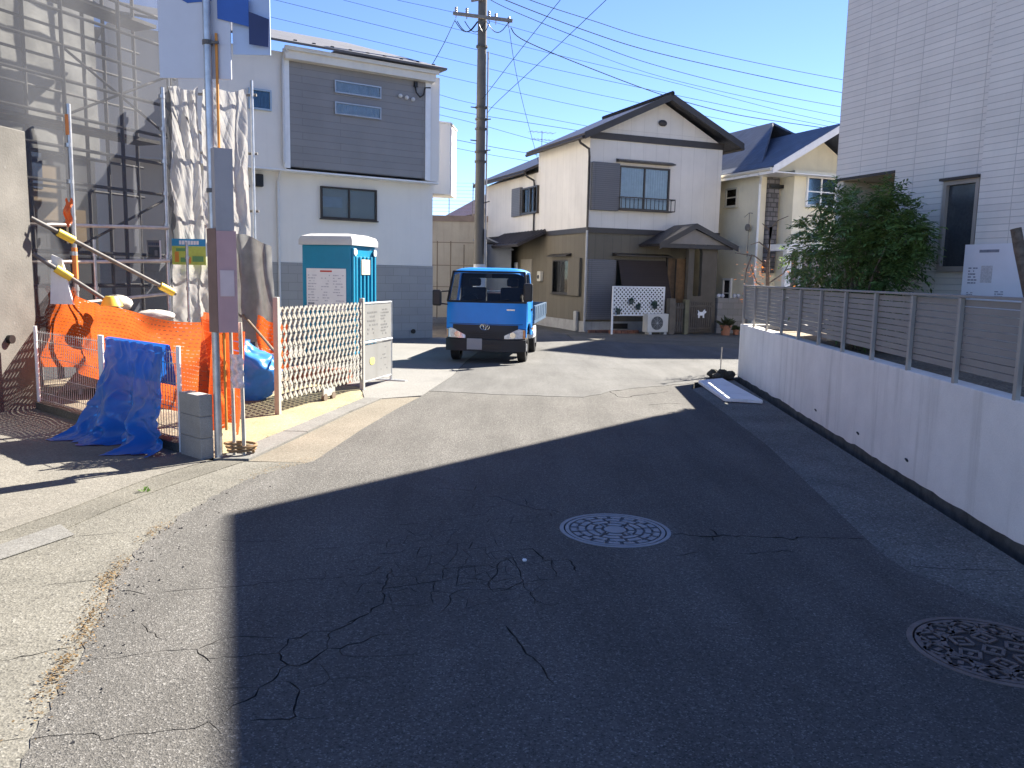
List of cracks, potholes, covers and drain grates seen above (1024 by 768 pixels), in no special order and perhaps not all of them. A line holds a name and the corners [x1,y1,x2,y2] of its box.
crack [673,529,862,556]
manhole cover [560,513,671,548]
manhole cover [906,617,1024,688]
crack [31,523,576,741]
